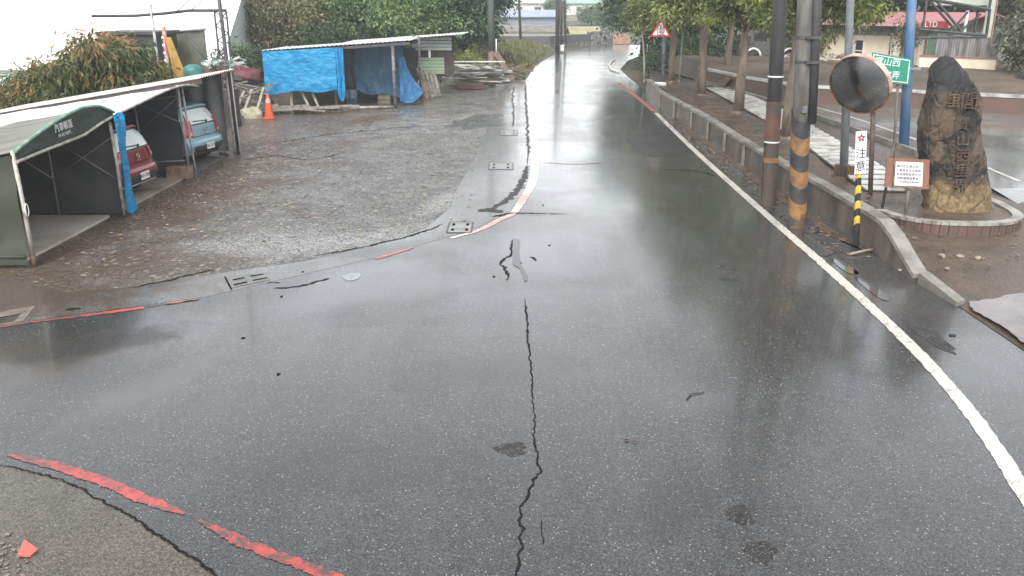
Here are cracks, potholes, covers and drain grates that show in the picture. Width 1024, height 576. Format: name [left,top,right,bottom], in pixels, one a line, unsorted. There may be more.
crack [515,299,544,576]
manhole cover [446,222,474,233]
pothole [493,442,527,457]
crack [315,224,441,256]
crack [268,278,329,288]
crack [499,238,514,280]
crack [128,270,212,307]
drain grate [224,272,270,289]
